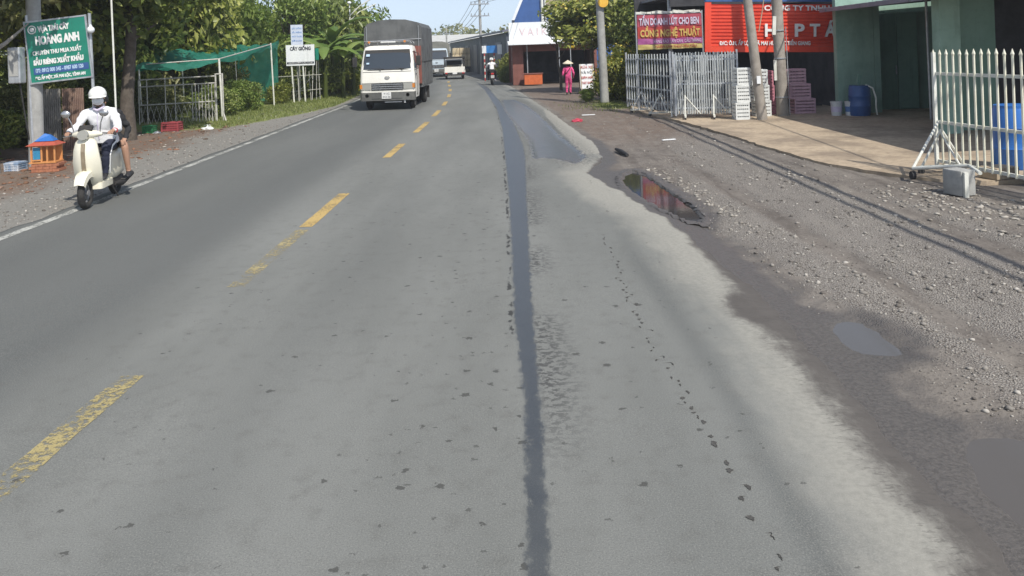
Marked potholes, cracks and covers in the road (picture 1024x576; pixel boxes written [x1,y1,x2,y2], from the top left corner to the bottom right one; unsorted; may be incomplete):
pothole [615,169,712,227]
